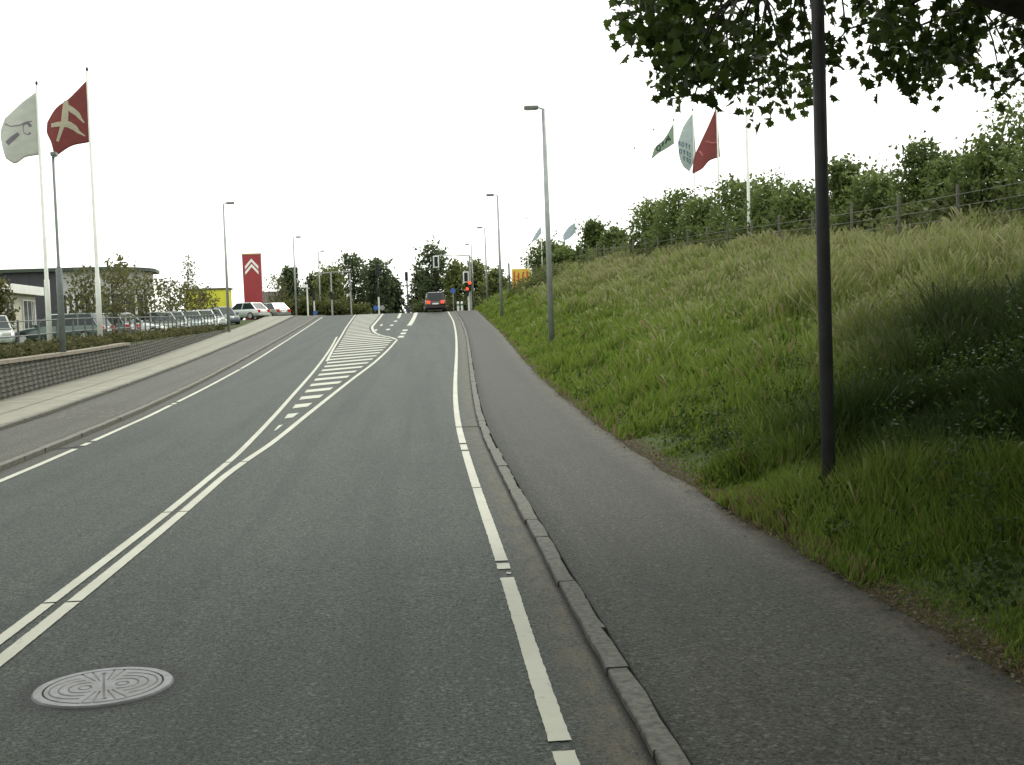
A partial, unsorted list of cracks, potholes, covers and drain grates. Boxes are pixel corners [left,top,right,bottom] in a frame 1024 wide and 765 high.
manhole cover [31,667,174,709]
